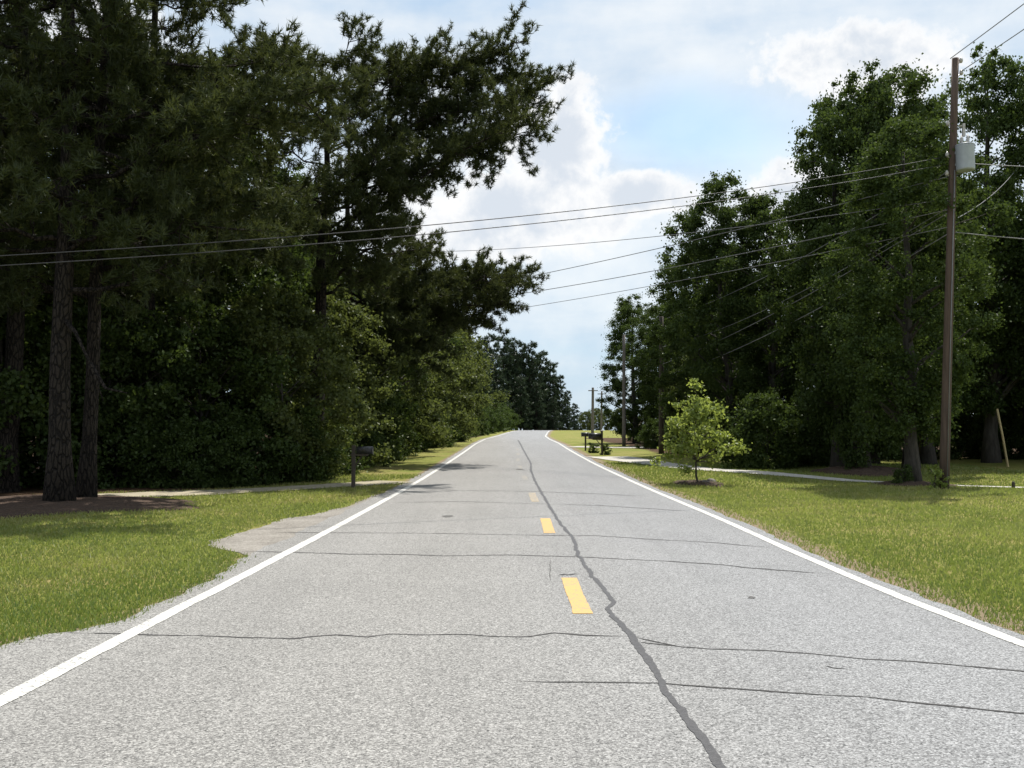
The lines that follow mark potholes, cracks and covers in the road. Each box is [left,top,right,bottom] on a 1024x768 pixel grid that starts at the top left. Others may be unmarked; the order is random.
crack [431,489,679,511]
crack [534,681,1024,714]
crack [637,637,1022,671]
crack [257,551,830,580]
